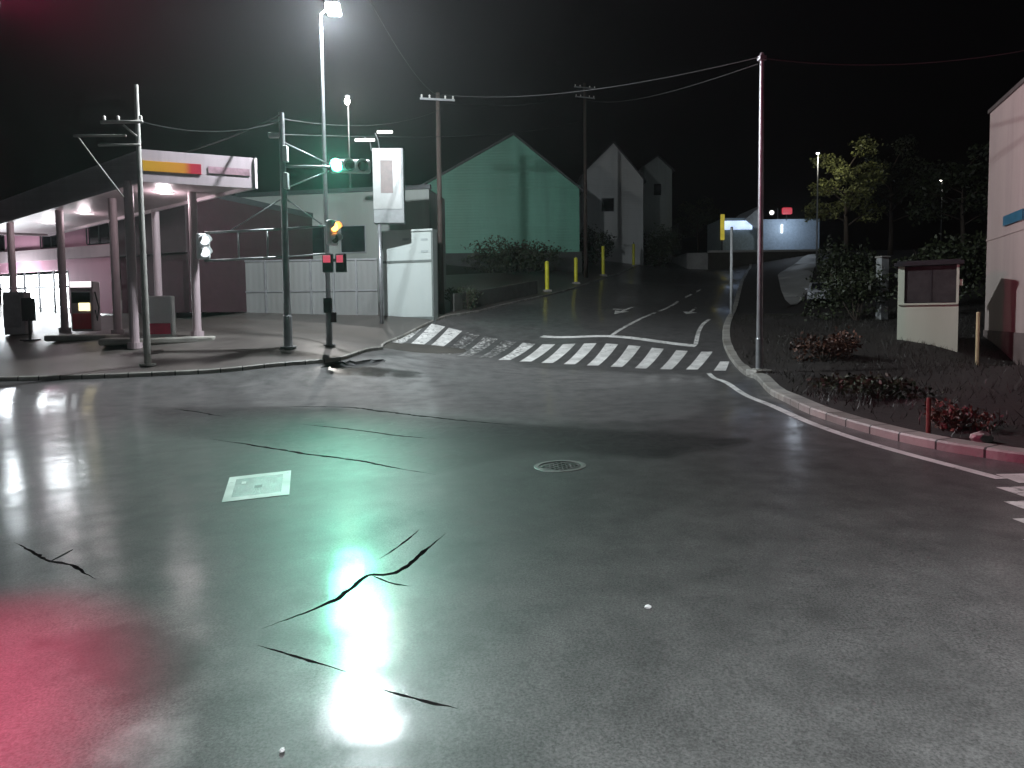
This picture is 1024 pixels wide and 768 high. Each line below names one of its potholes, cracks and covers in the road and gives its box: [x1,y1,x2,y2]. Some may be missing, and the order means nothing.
crack [270,531,440,626]
crack [284,406,508,439]
crack [16,543,95,579]
utility cover [222,470,291,502]
crack [214,439,430,474]
crack [258,645,346,672]
crack [382,689,457,709]
